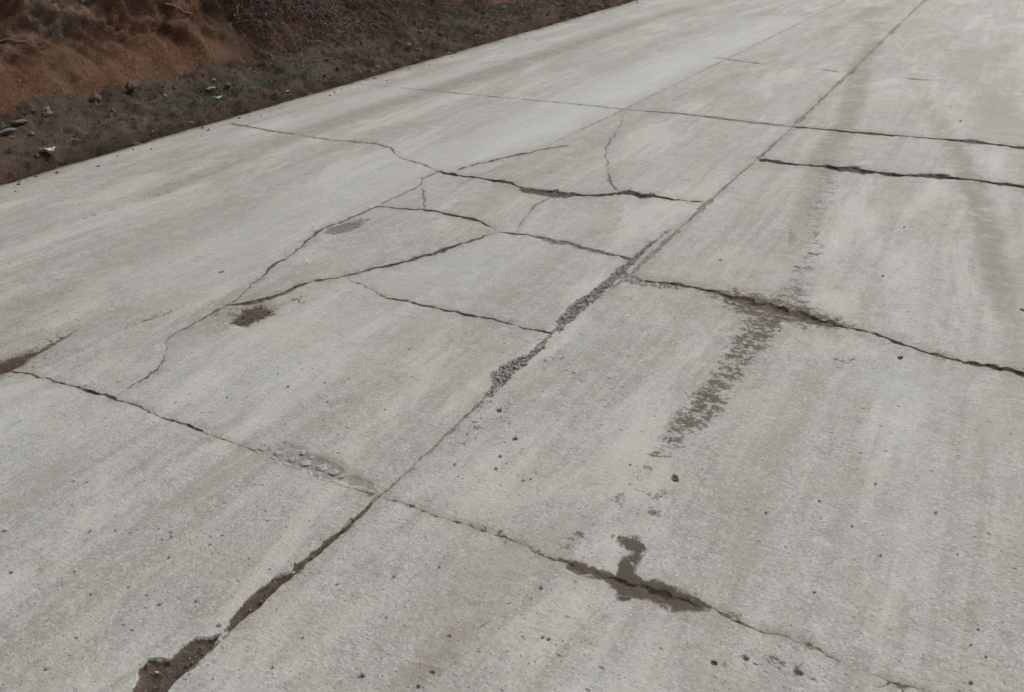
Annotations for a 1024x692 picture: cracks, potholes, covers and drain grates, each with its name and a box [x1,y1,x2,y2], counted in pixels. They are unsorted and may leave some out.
crack [645,280,1024,378]
crack [114,113,702,397]
